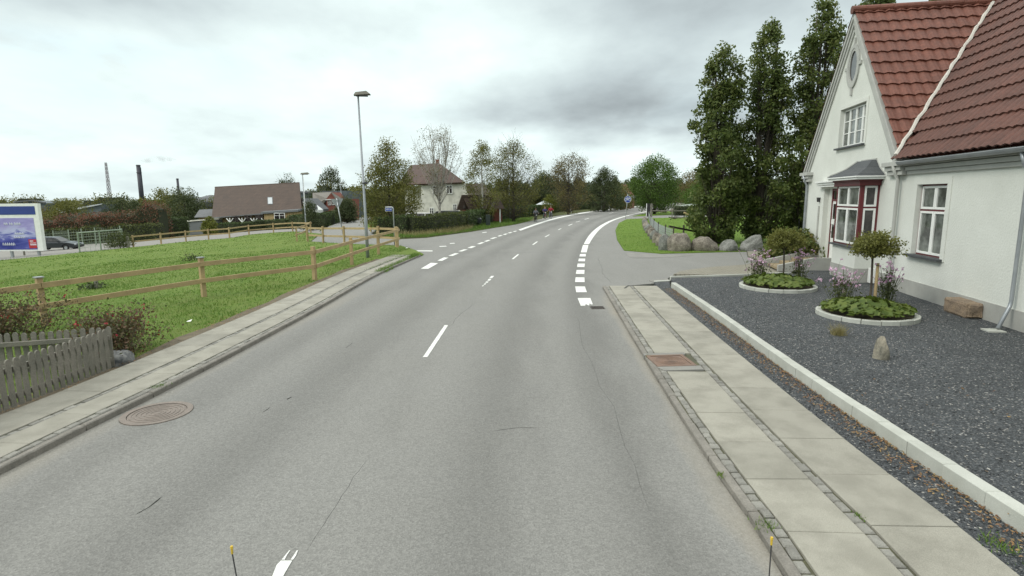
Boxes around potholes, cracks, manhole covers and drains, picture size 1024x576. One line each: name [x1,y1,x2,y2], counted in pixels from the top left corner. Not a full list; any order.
manhole cover [119,401,193,426]
manhole cover [645,354,697,367]
